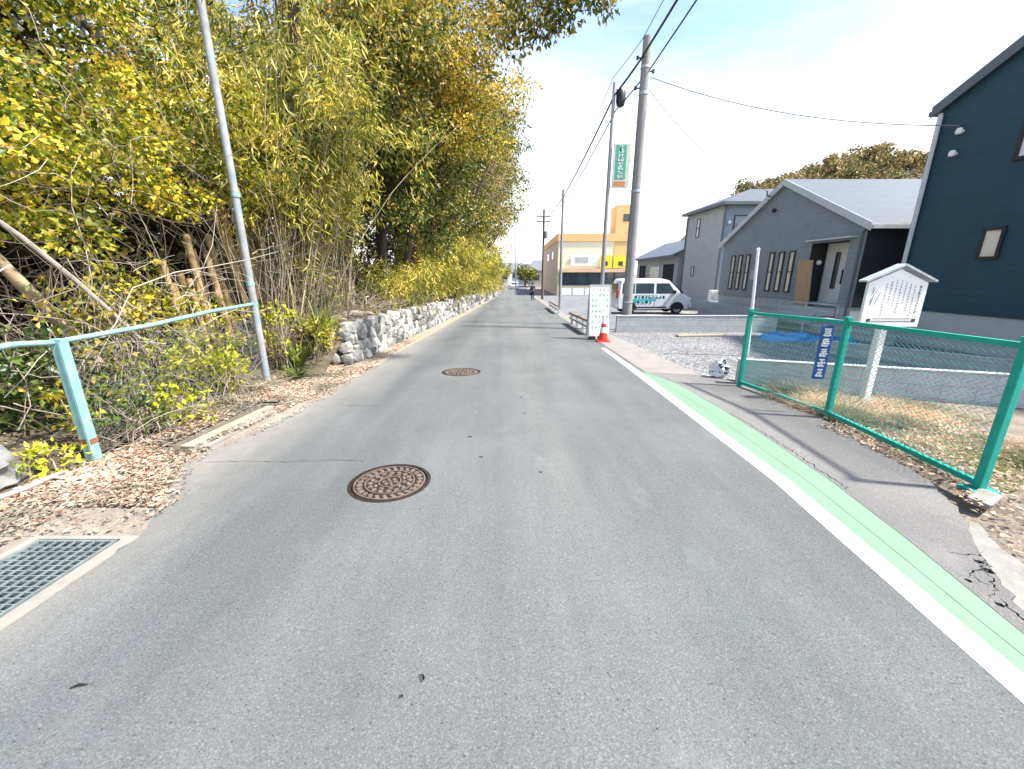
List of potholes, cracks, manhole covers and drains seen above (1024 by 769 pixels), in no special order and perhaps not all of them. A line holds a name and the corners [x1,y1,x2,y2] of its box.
manhole cover [442,368,481,376]
drain grate [0,539,118,618]
crack [946,551,1024,620]
manhole cover [347,464,431,503]
